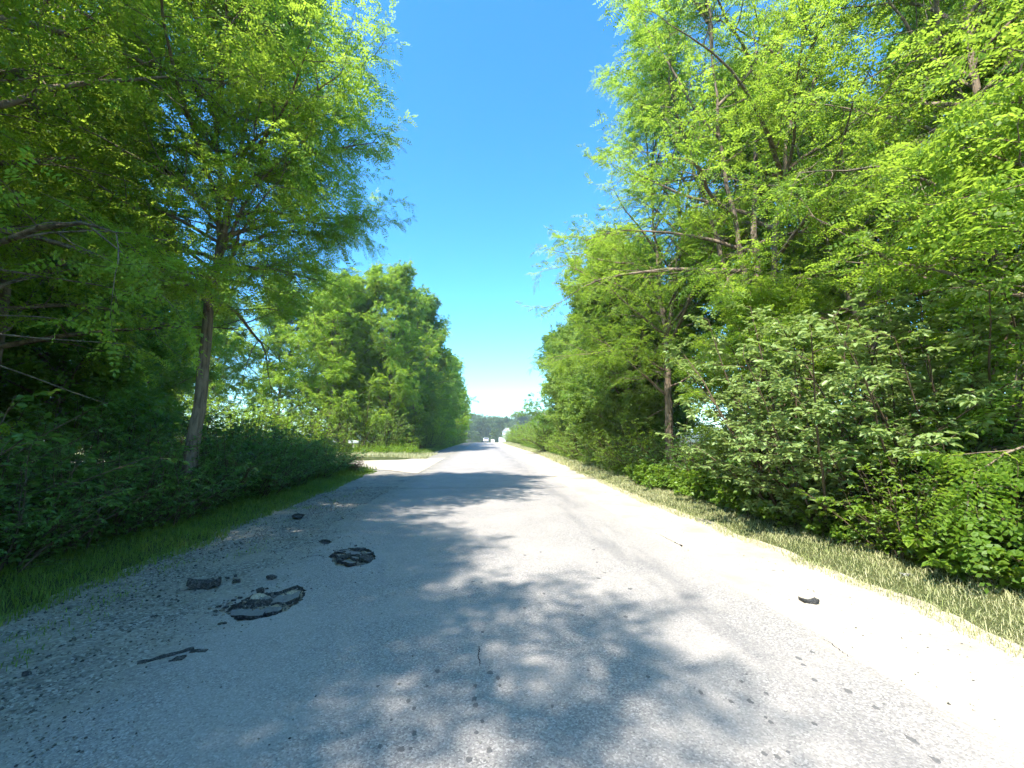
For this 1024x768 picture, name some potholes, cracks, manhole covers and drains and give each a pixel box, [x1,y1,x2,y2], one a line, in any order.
pothole [224,585,306,622]
pothole [329,547,376,568]
